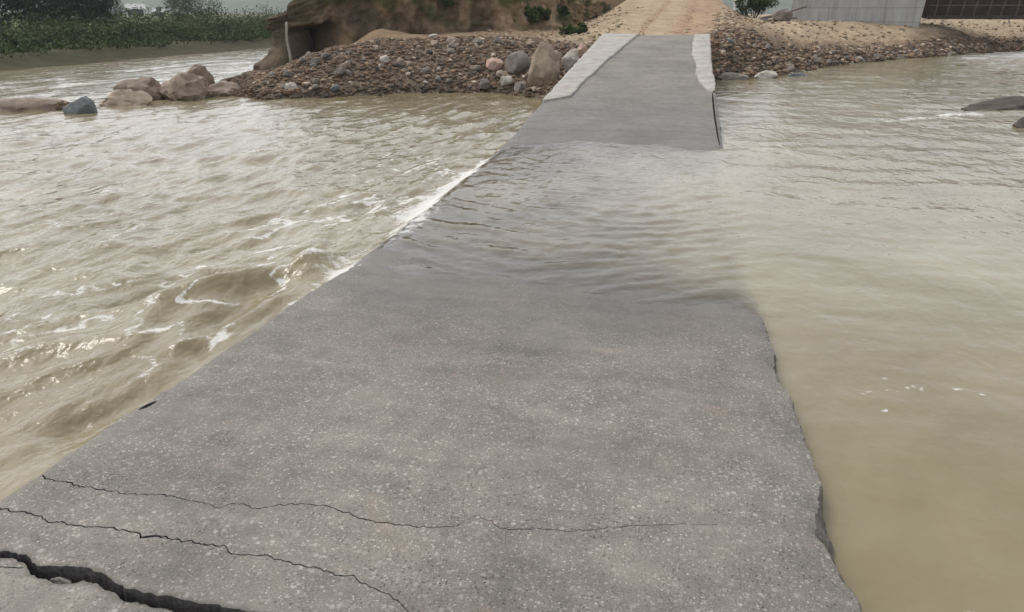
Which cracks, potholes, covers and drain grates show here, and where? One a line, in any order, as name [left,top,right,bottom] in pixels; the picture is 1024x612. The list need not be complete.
crack [0,508,409,612]
crack [42,475,717,532]
